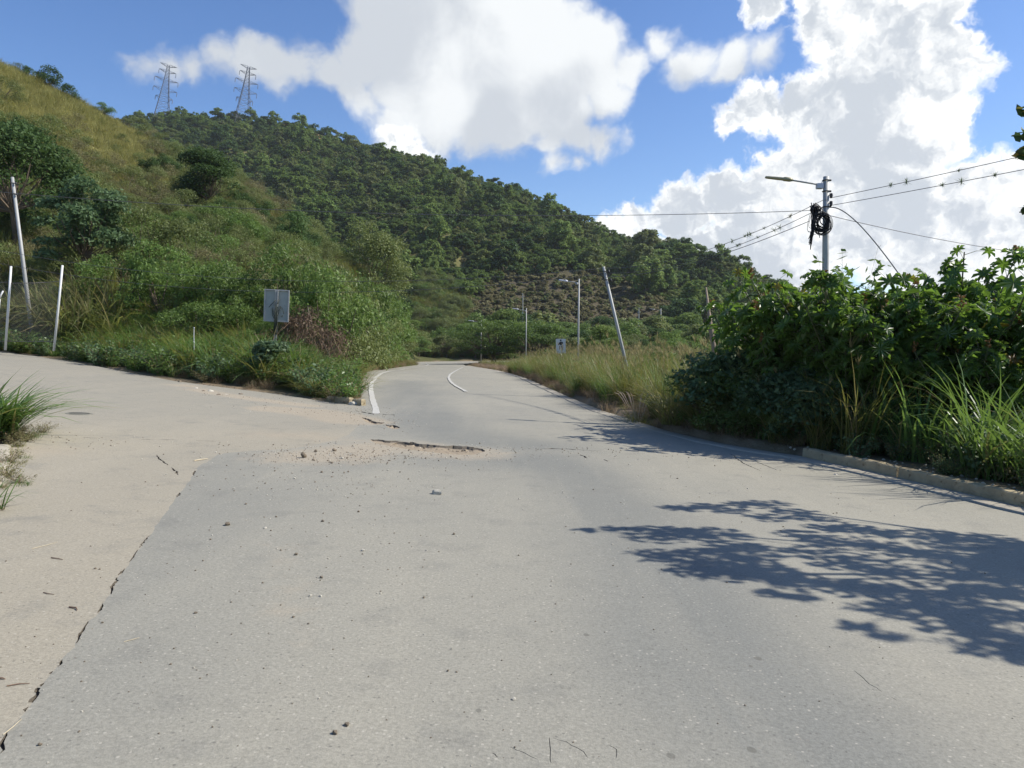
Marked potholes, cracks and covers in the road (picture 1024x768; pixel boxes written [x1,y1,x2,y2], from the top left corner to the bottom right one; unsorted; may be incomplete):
crack [0,455,196,753]
